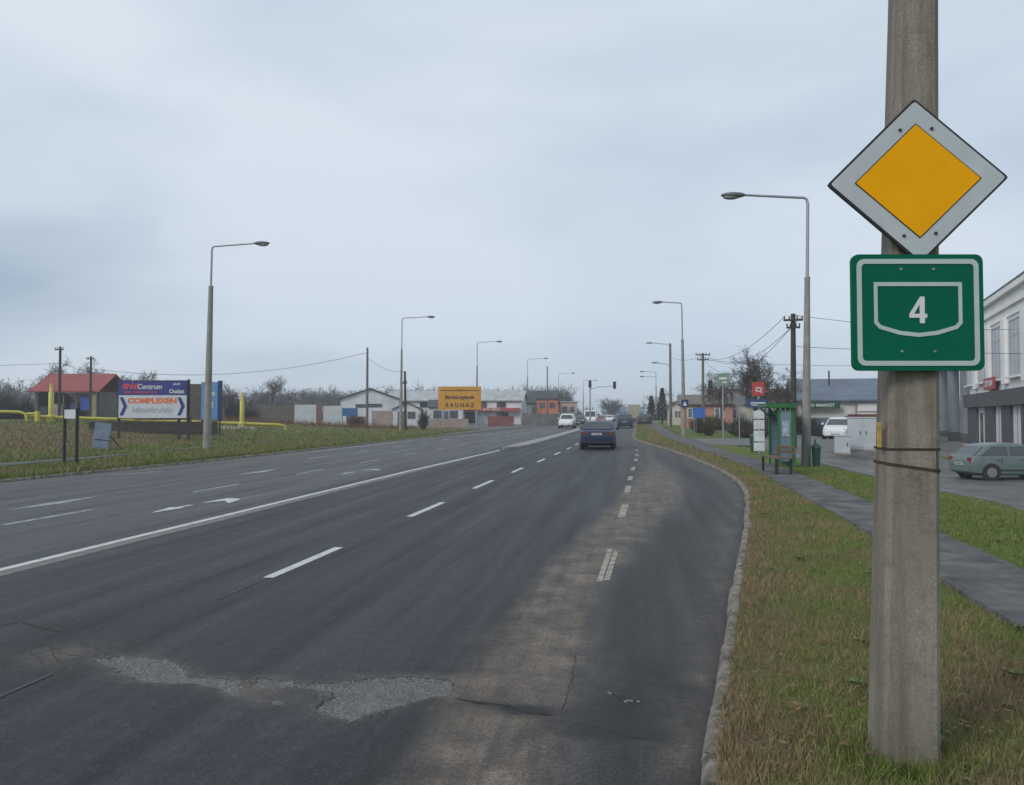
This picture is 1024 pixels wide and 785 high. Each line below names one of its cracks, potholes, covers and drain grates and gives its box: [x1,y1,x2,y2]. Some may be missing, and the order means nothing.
crack [3,622,136,671]
crack [455,655,659,741]
pothole [249,674,456,725]
pothole [89,652,249,696]
